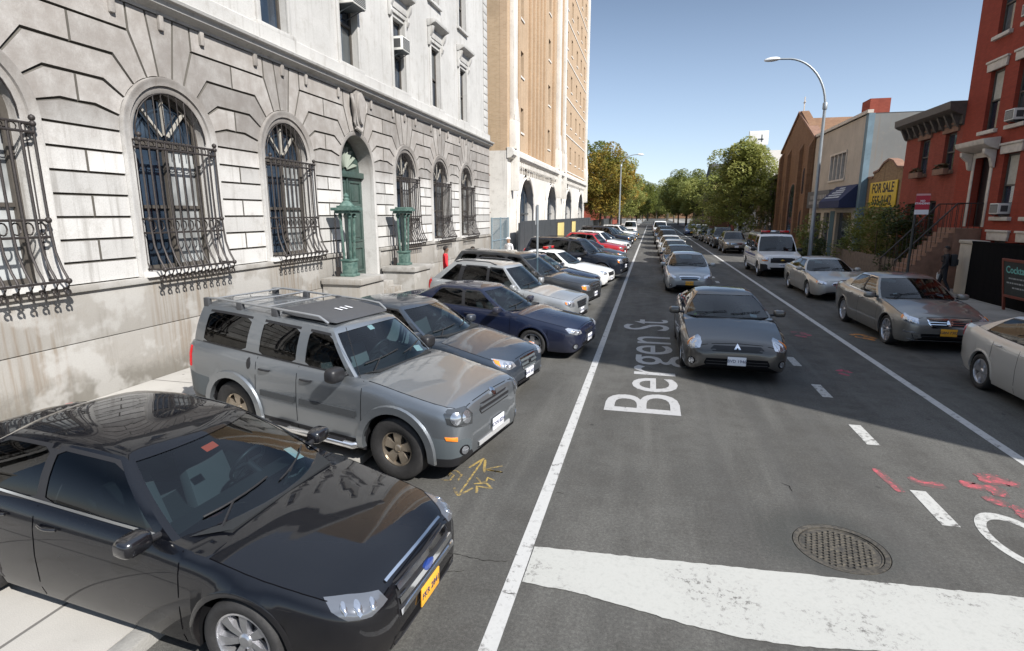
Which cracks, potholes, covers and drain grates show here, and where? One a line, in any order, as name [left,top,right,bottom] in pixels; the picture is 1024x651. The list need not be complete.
manhole cover [792,524,891,575]
